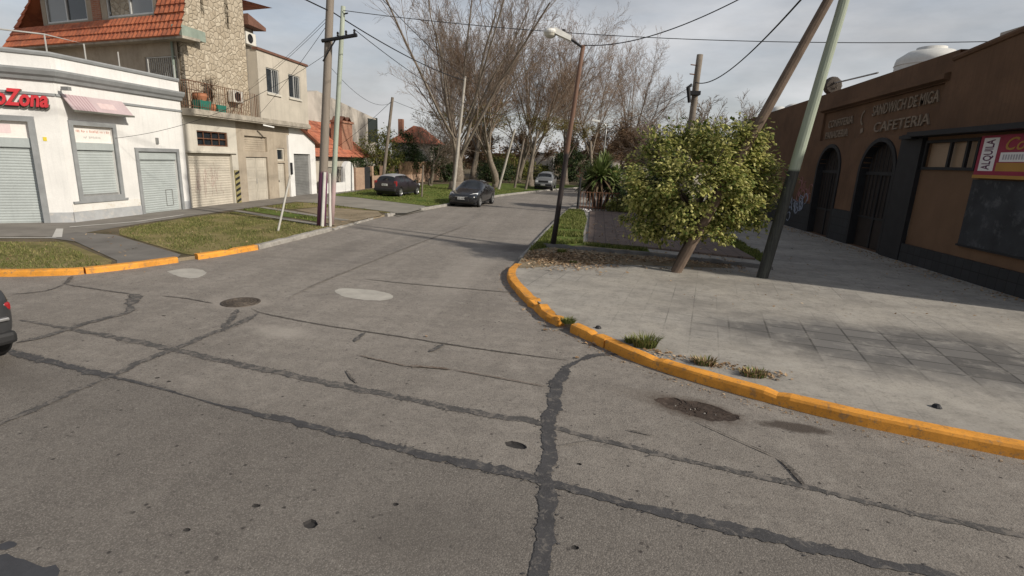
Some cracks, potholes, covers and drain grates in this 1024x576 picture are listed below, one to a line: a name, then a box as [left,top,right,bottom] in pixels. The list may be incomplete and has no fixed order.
crack [7,276,1024,576]
pothole [303,519,318,529]
manhole cover [220,297,261,307]
pothole [505,441,527,449]
